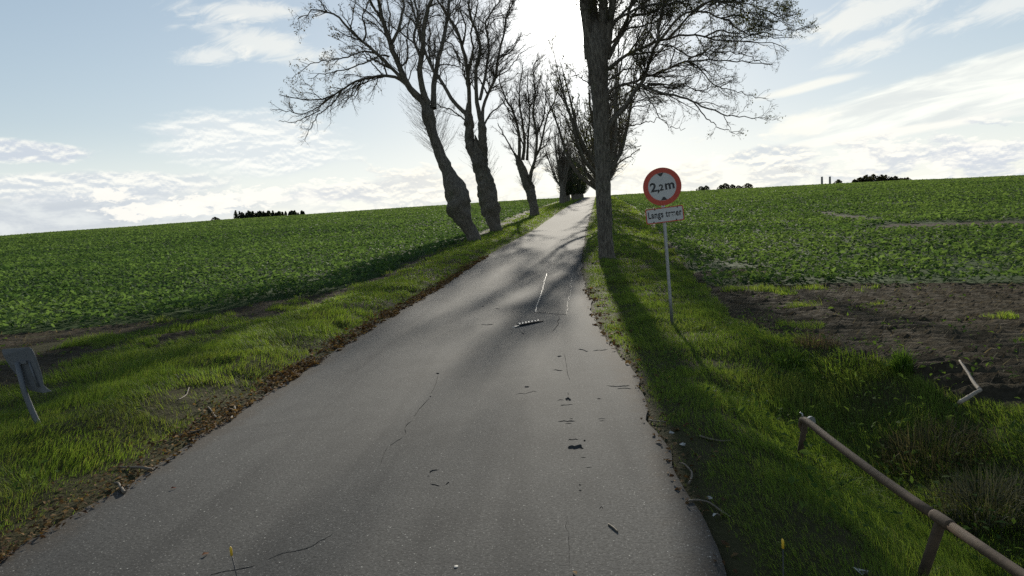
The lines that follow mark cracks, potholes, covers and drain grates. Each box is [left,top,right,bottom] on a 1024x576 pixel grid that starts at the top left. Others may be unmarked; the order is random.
crack [209,535,331,576]
